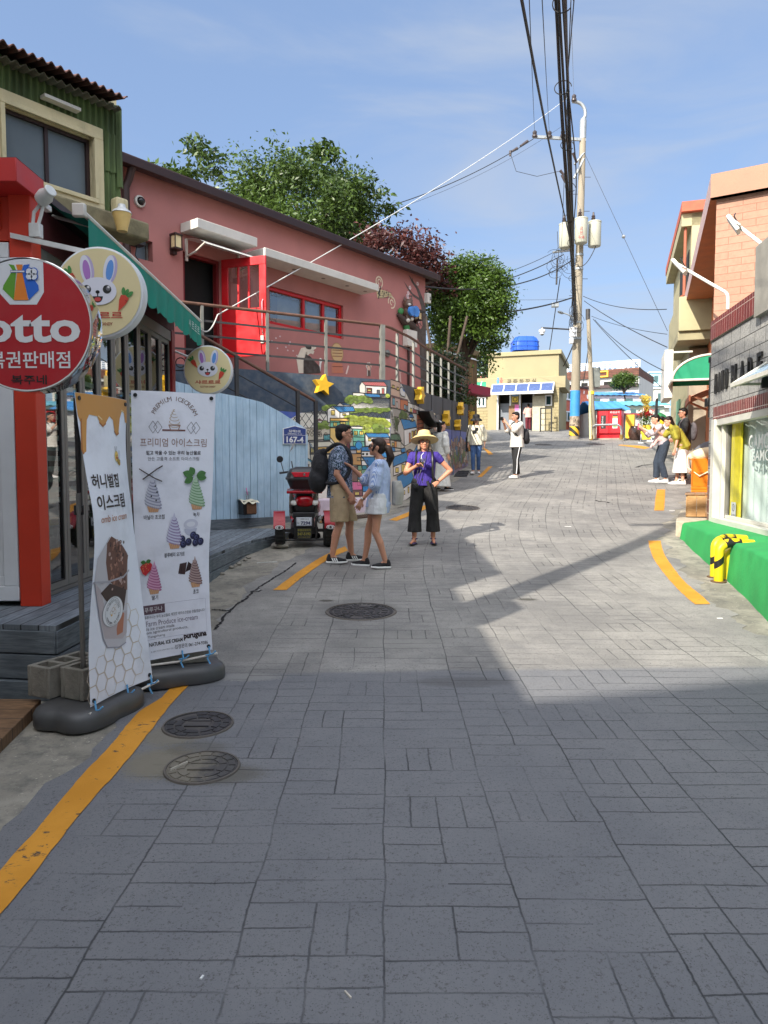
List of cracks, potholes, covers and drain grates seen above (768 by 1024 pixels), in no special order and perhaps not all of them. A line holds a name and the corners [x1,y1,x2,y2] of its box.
manhole cover [161,711,234,739]
manhole cover [325,603,397,621]
crack [212,562,296,630]
manhole cover [163,750,241,786]
